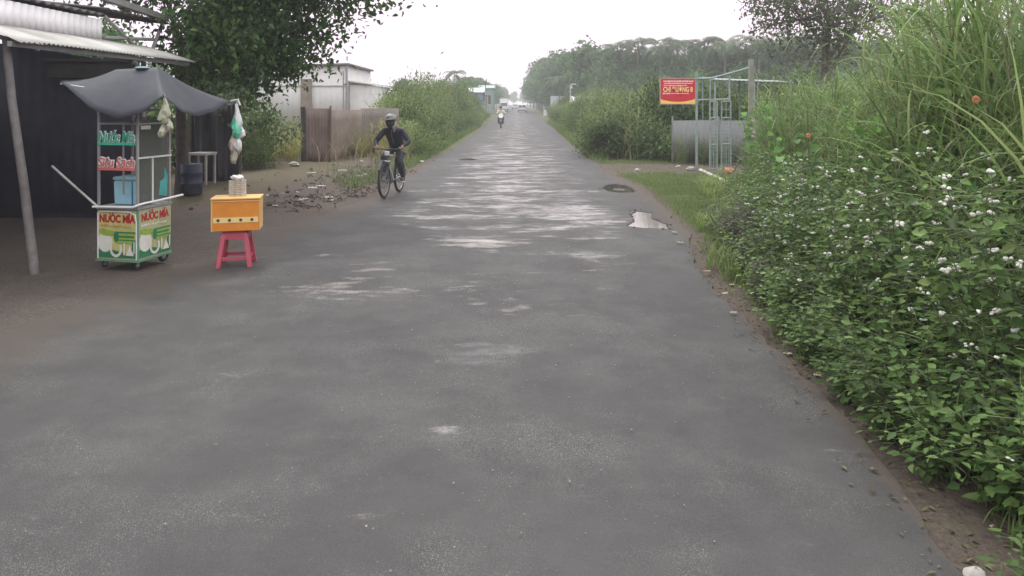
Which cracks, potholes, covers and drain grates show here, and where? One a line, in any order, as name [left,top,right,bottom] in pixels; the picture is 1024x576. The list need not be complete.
pothole [627,209,672,229]
pothole [599,183,637,193]
